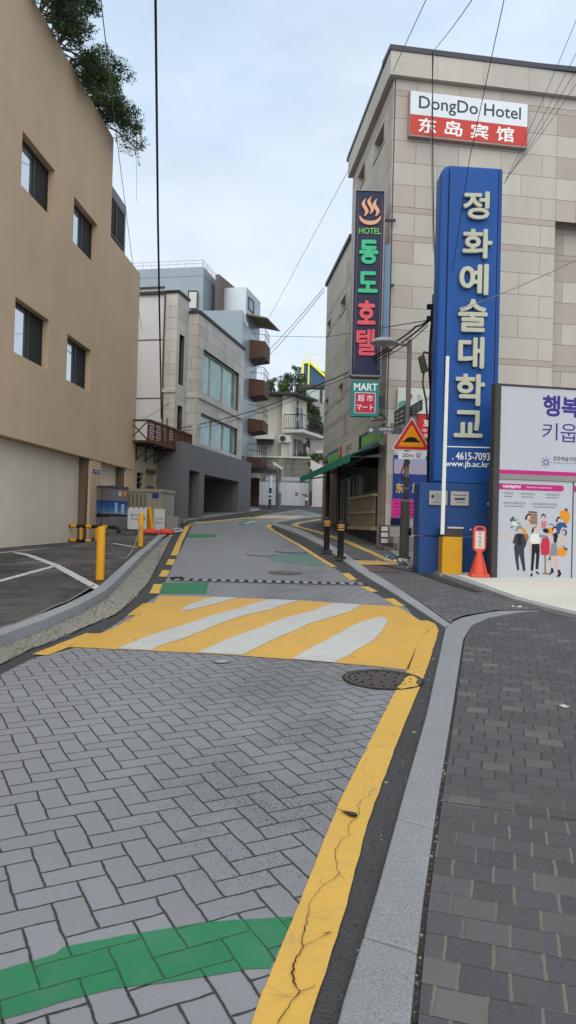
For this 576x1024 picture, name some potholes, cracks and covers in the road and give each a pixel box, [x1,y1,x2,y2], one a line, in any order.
drain grate [170,577,369,586]
crack [274,788,375,1024]
manhole cover [342,669,425,690]
